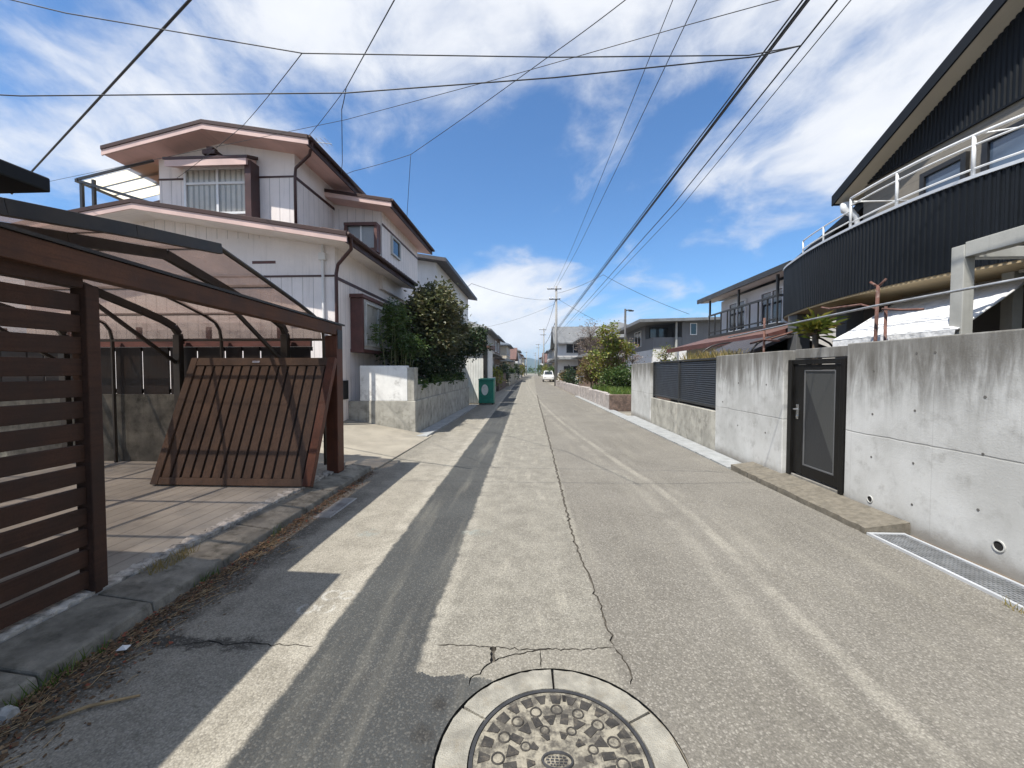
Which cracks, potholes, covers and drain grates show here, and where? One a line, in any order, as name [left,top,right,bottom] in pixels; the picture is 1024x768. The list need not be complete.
crack [440,395,633,685]
manhole cover [432,669,689,768]
drain grate [867,532,1024,611]
